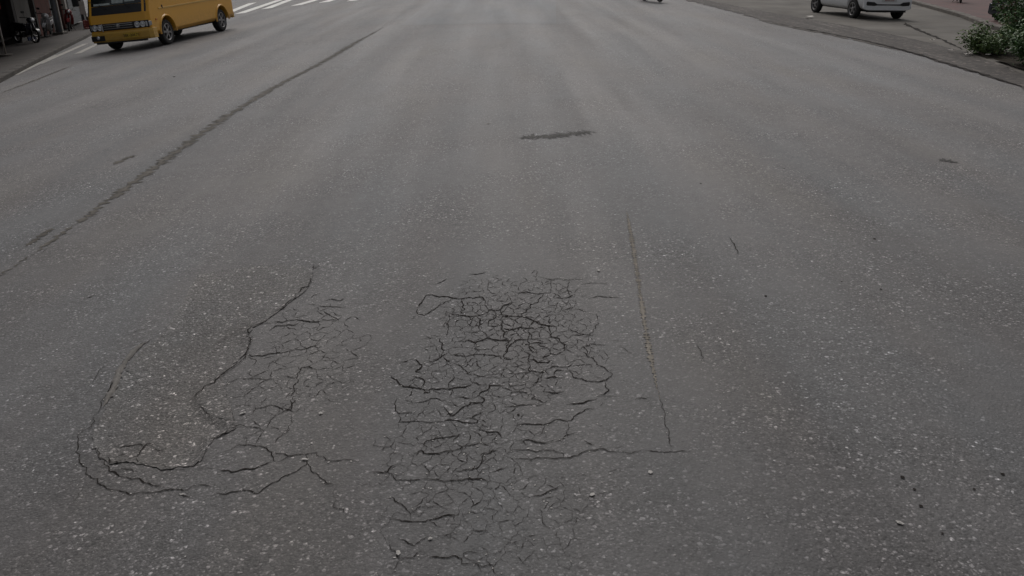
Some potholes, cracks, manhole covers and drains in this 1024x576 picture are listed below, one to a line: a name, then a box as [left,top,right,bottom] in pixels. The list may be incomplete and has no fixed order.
crack [75,264,371,512]
crack [360,271,689,576]
